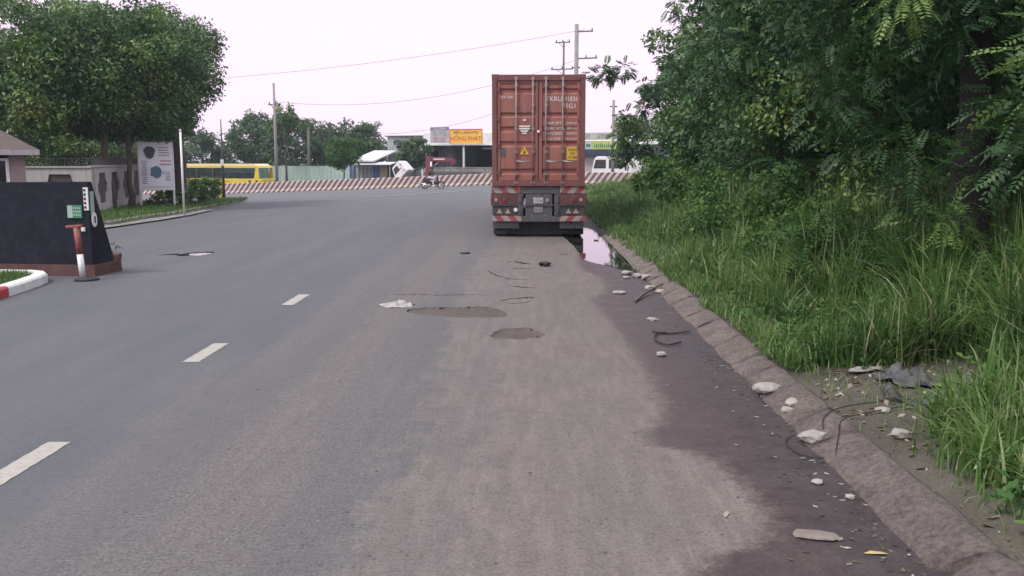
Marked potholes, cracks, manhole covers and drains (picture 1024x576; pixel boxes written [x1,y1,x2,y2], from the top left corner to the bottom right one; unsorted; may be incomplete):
crack [488,261,533,304]
